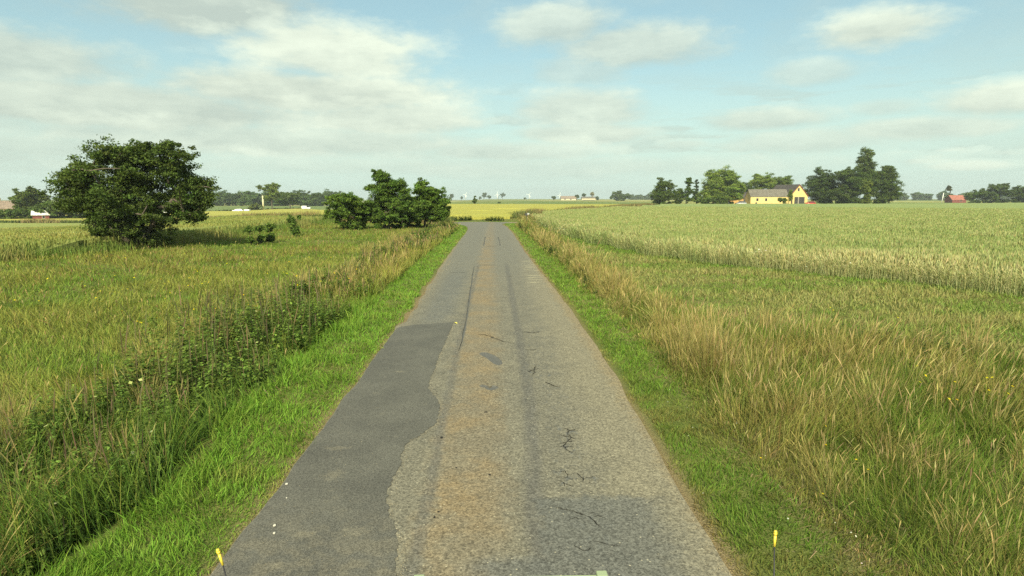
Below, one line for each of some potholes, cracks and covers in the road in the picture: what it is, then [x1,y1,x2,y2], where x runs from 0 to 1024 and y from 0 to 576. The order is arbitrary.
crack [556,471,616,551]
